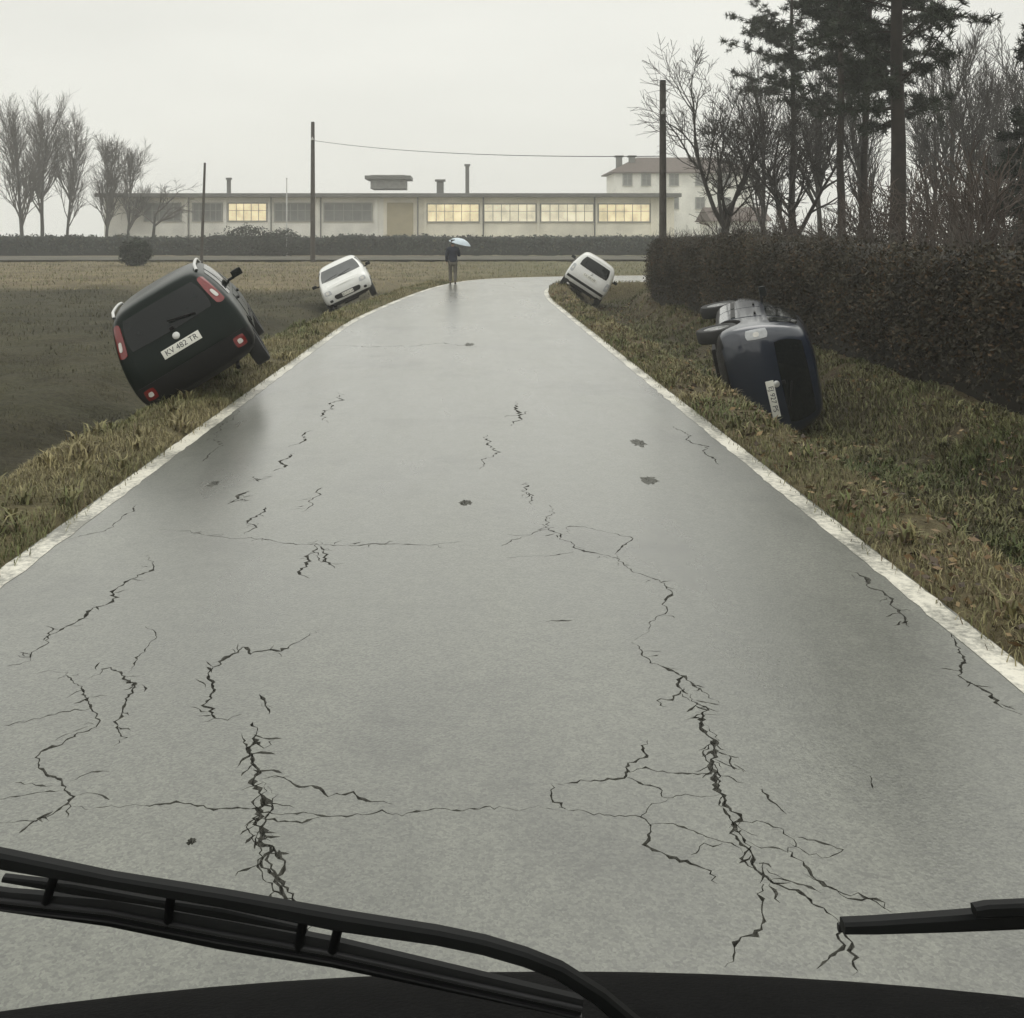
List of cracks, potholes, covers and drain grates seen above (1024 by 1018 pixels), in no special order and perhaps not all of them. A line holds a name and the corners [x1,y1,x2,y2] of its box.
crack [228,395,343,532]
crack [845,570,910,627]
crack [297,545,335,578]
crack [4,626,558,931]
crack [502,483,675,639]
crack [939,634,1022,715]
crack [550,643,891,974]
crack [511,403,527,426]
